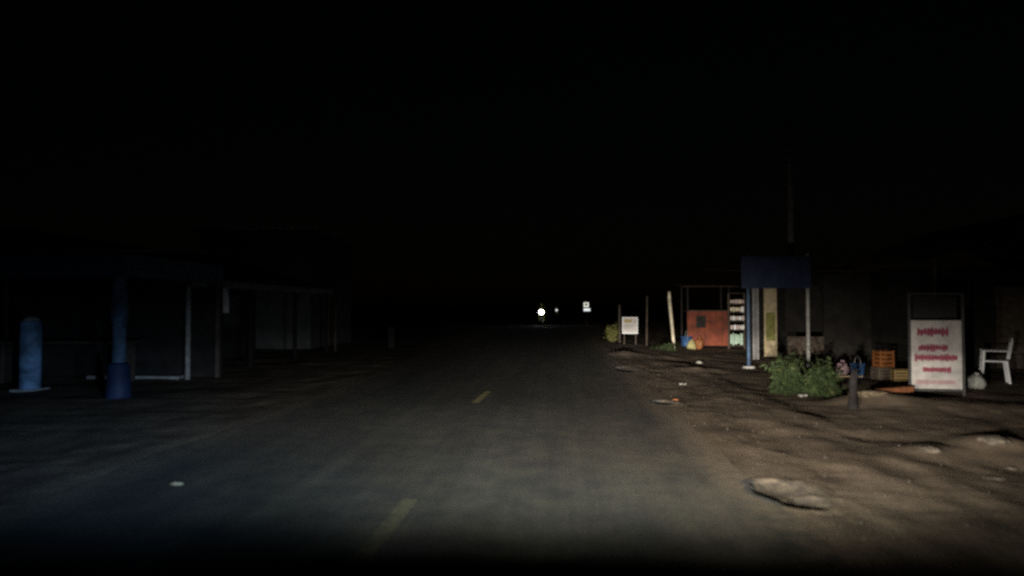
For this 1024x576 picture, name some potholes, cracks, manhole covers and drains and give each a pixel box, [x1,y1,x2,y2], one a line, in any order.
pothole [740,476,847,515]
